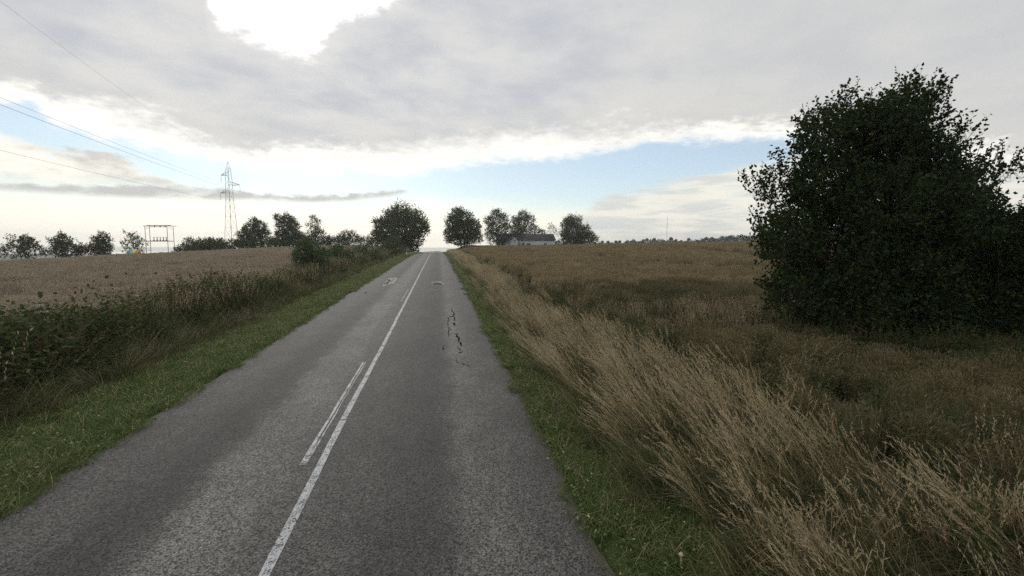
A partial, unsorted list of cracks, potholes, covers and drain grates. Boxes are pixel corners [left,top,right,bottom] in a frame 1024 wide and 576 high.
crack [443,310,471,368]
